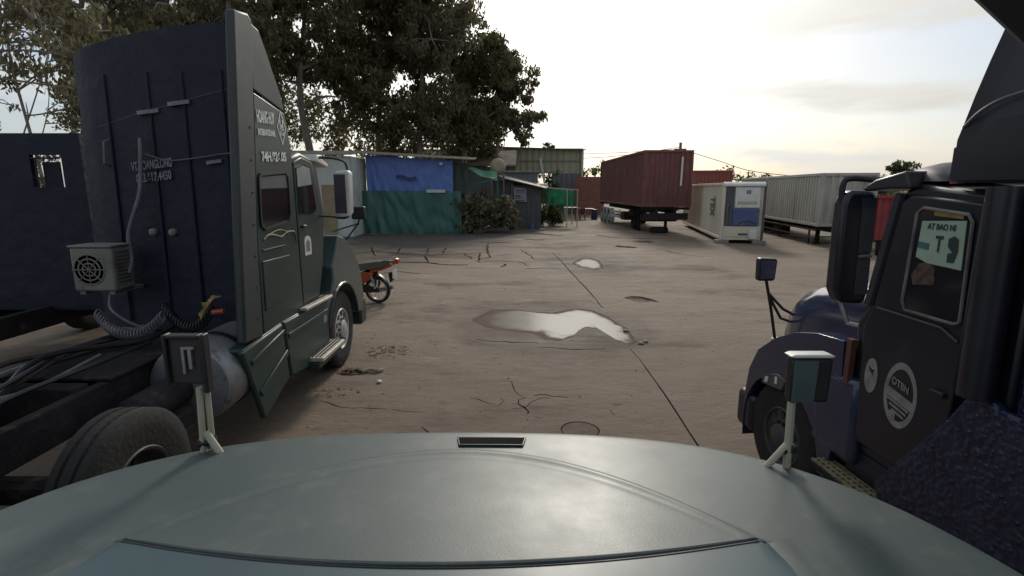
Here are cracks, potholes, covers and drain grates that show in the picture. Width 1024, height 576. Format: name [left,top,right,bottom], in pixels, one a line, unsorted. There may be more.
pothole [472,309,638,345]
crack [475,384,569,419]
manhole cover [561,422,600,435]
crack [354,233,561,274]
